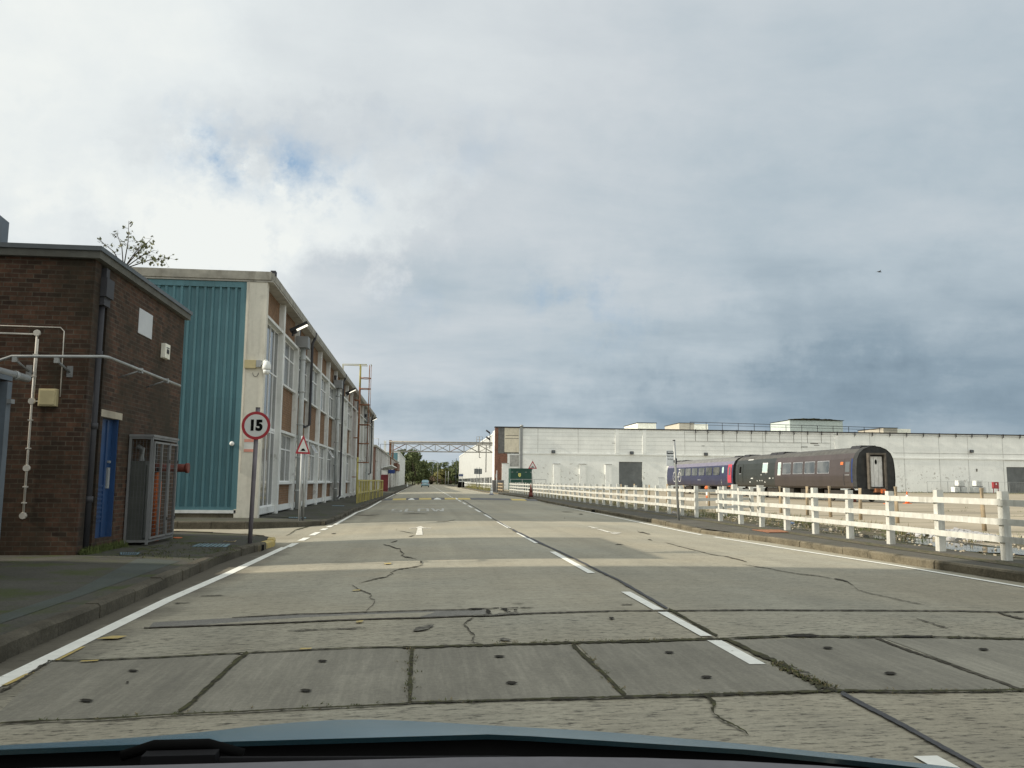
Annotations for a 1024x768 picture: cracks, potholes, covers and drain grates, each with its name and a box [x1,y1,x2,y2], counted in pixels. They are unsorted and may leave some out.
crack [289,513,451,631]
crack [640,532,948,628]
crack [702,694,749,735]
